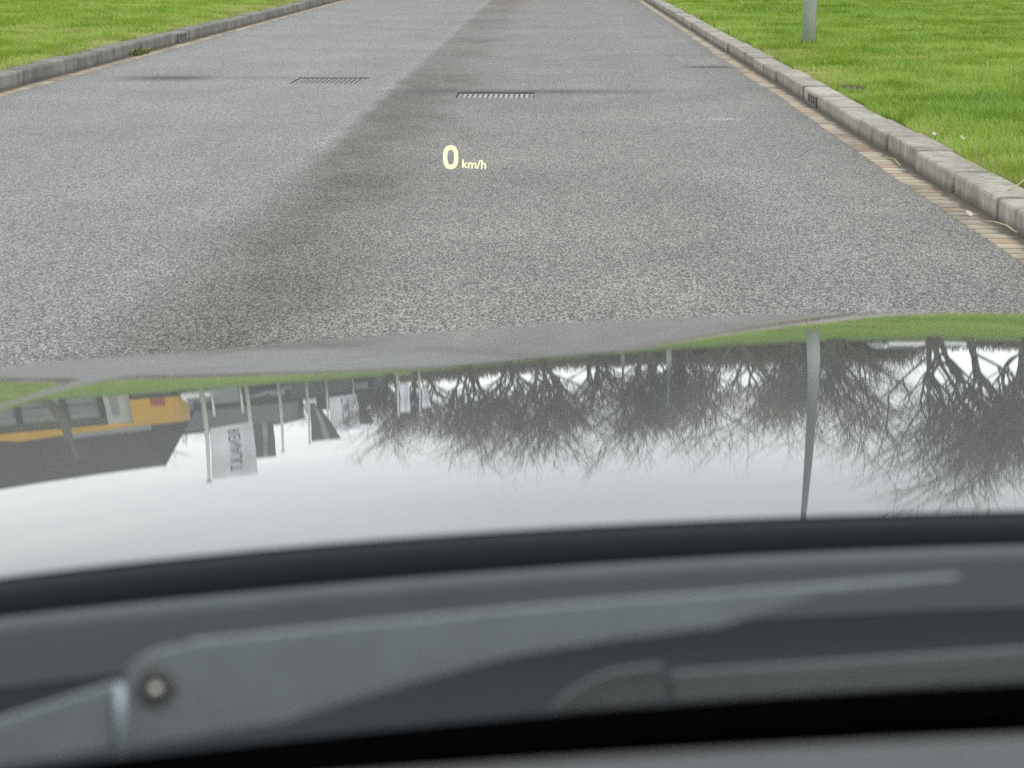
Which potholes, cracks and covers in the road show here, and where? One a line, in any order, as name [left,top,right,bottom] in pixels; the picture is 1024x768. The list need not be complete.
drain grate [807,92,817,108]
